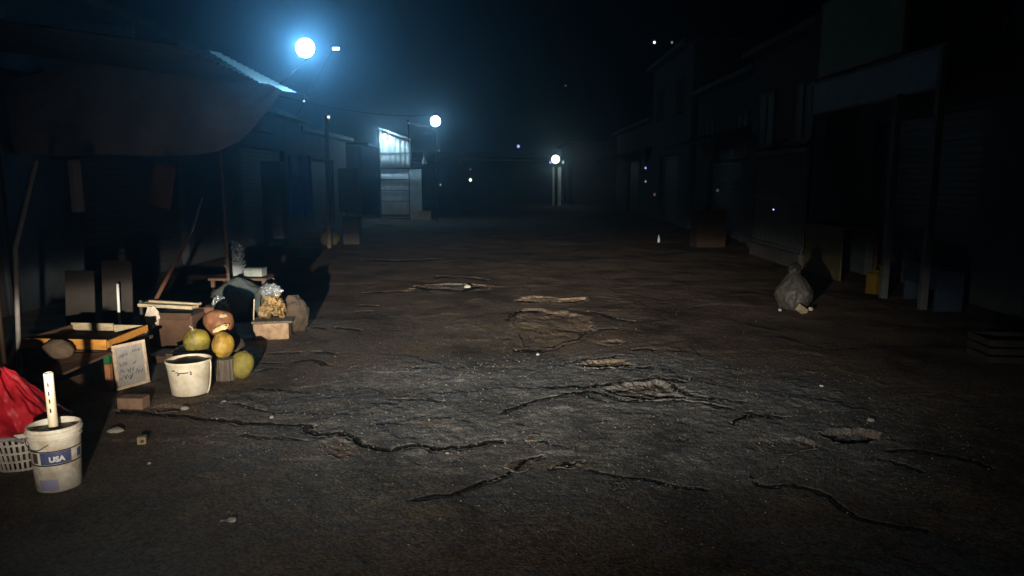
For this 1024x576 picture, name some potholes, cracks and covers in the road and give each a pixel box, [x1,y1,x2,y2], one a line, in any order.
pothole [599,379,730,407]
pothole [511,295,590,304]
pothole [568,359,640,370]
pothole [815,427,886,446]
crack [756,449,991,531]
pothole [406,283,493,293]
crack [119,311,789,499]
